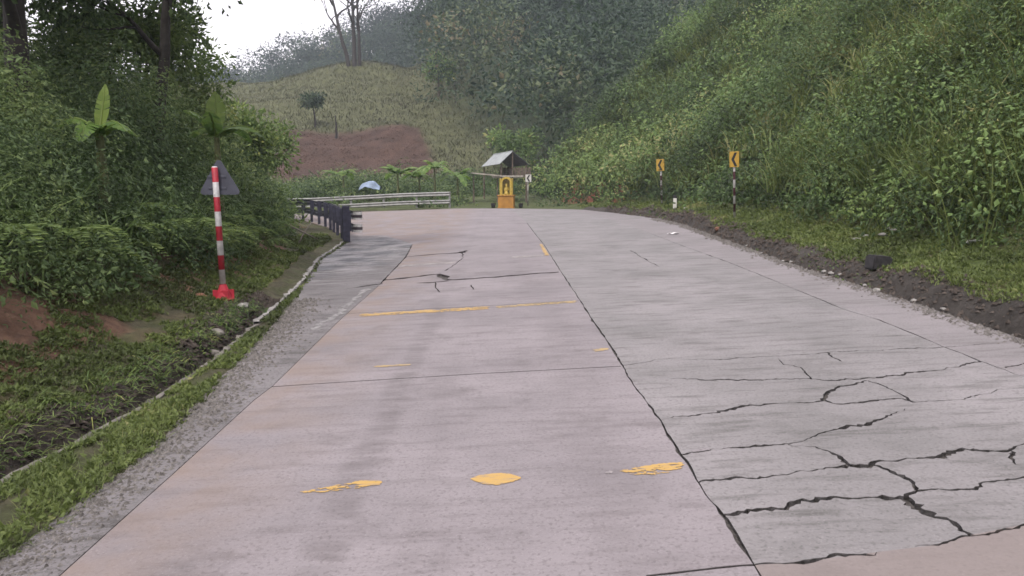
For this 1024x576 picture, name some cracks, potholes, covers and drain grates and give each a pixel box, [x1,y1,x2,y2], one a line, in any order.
crack [363,244,551,292]
crack [527,223,1024,572]
